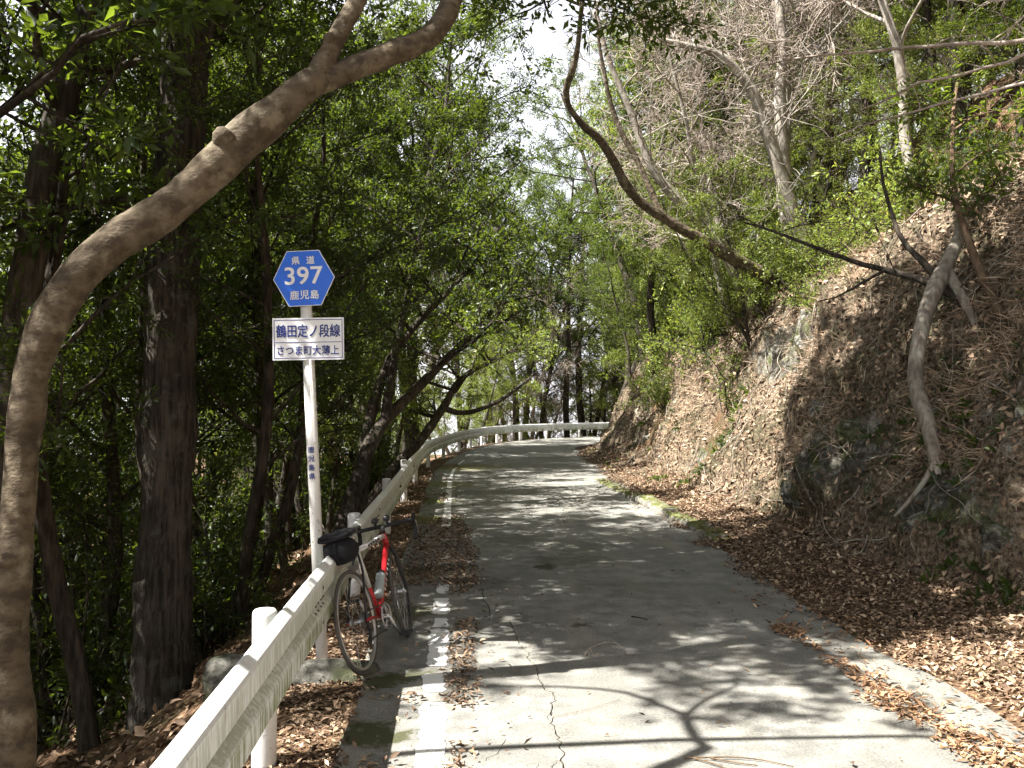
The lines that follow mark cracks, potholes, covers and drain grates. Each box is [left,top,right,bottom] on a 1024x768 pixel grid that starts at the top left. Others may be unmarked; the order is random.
crack [509,621,571,768]
